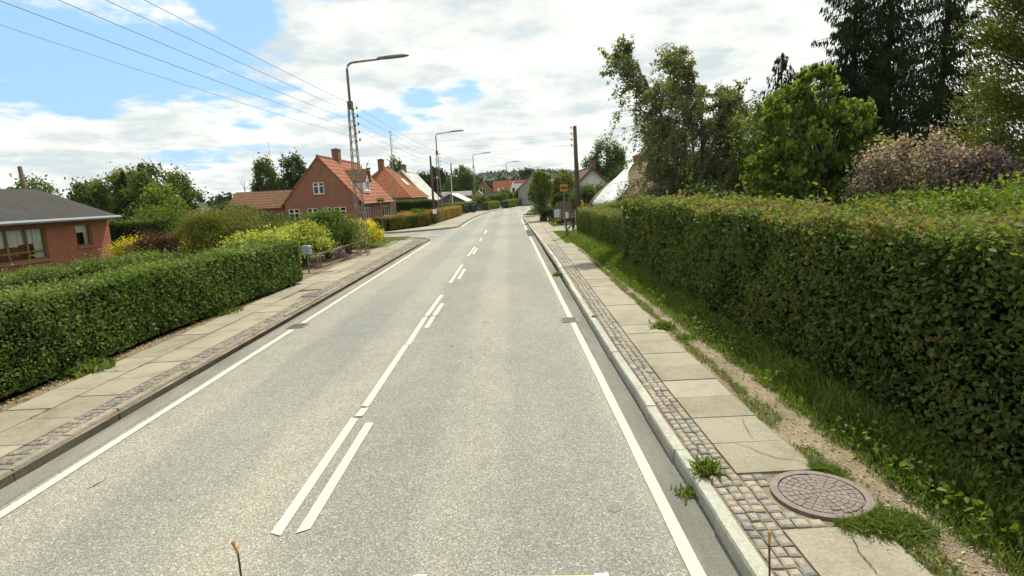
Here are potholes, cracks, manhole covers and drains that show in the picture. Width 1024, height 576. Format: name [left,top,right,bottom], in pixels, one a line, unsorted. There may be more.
manhole cover [770,470,875,521]
